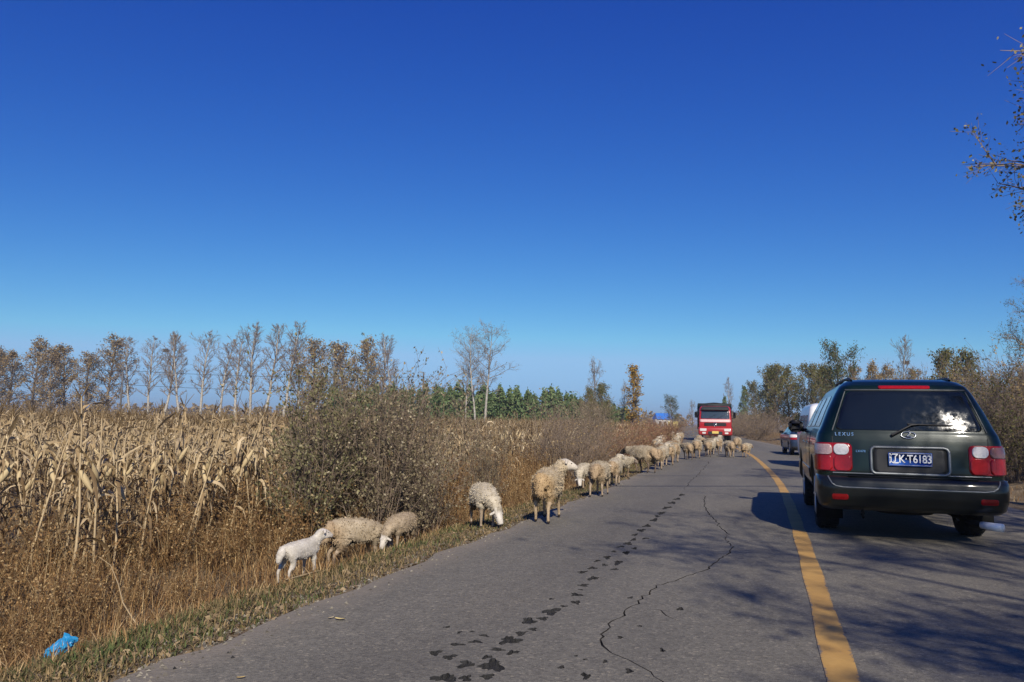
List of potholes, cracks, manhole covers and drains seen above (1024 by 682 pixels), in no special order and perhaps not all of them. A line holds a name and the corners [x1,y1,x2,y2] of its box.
pothole [498,636,523,645]
crack [599,461,734,682]
pothole [477,658,505,672]
pothole [429,673,457,682]
